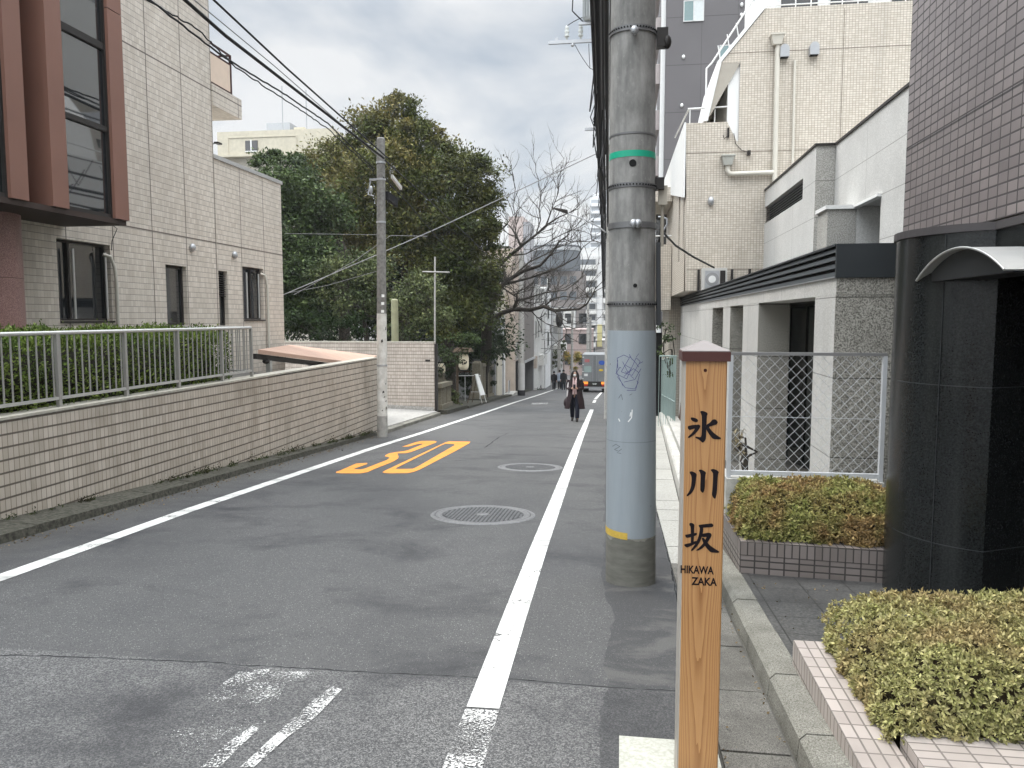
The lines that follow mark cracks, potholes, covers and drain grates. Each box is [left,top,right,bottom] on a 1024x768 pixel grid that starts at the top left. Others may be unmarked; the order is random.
manhole cover [430,505,535,525]
manhole cover [498,463,563,472]
